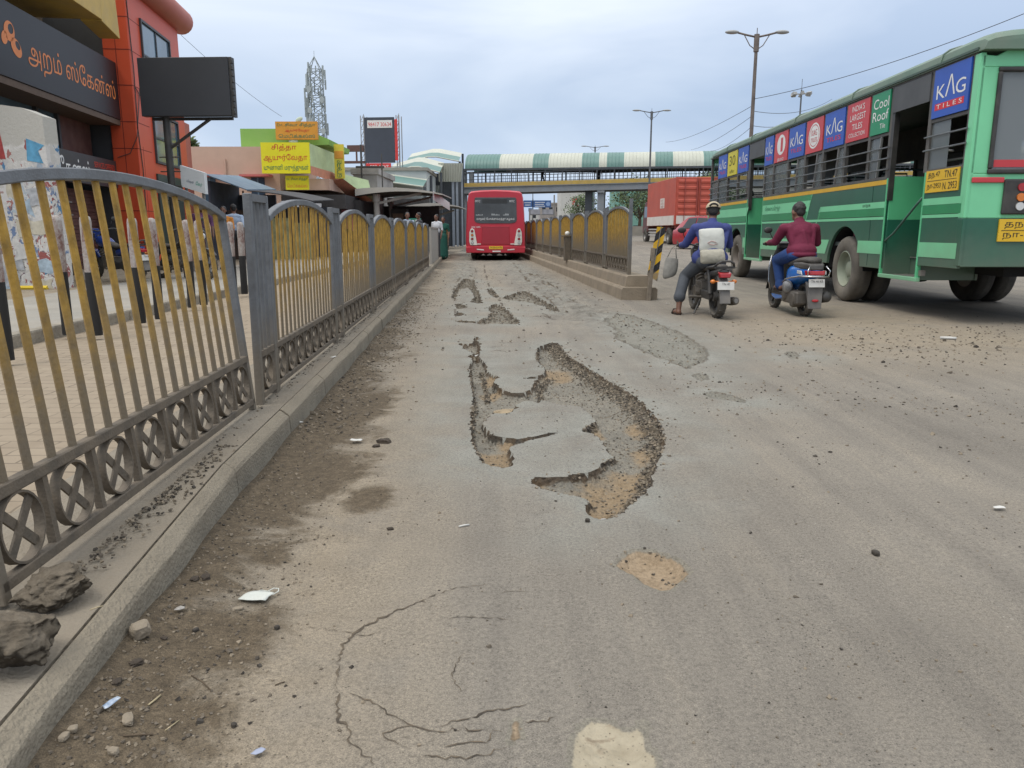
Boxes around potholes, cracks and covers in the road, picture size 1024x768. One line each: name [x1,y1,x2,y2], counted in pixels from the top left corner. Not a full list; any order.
pothole [457,337,482,363]
pothole [468,343,666,519]
pothole [503,291,559,313]
crack [306,584,552,763]
pothole [451,279,483,304]
pothole [457,304,520,324]
